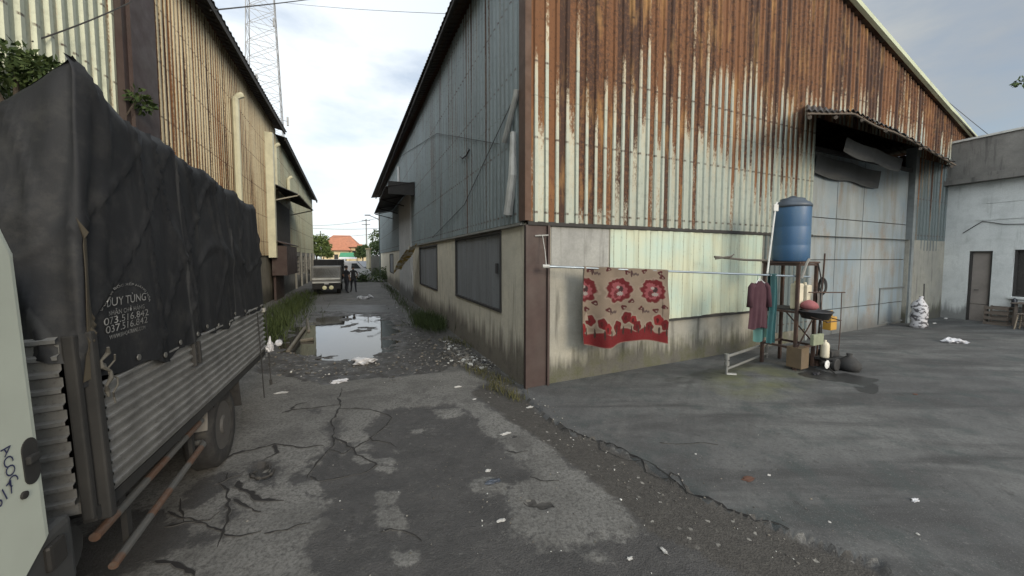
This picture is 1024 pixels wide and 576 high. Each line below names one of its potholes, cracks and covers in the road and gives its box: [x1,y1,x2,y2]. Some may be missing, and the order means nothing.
pothole [254,461,272,481]
crack [560,428,789,529]
crack [264,522,310,534]
crack [164,443,323,527]
crack [282,402,334,413]
